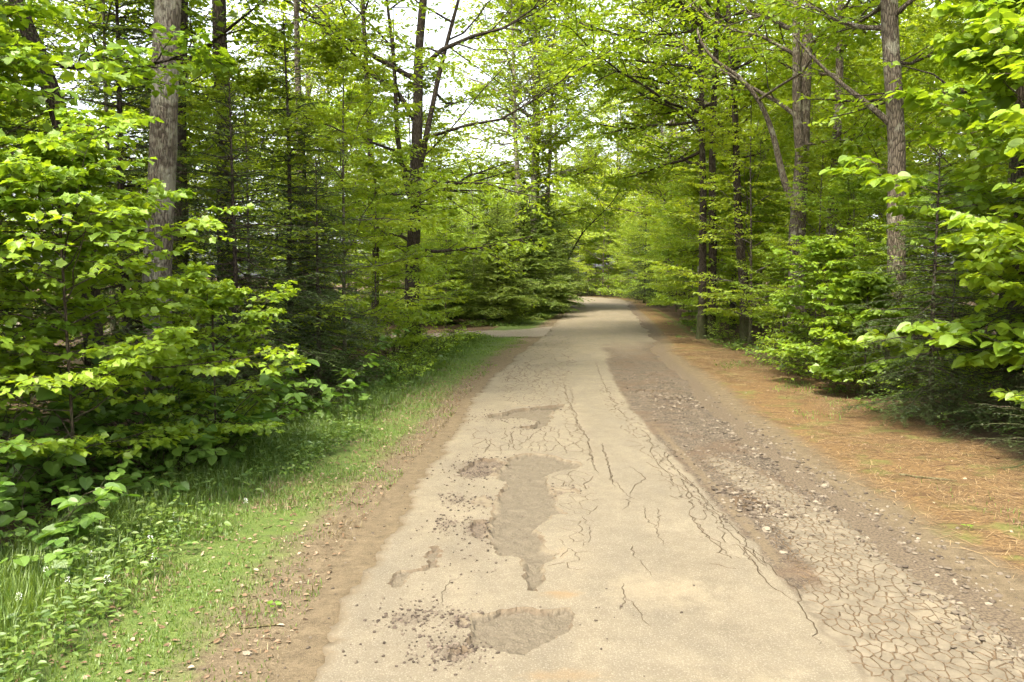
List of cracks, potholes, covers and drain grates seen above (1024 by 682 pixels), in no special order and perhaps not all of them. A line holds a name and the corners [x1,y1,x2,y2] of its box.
pothole [465,607,576,656]
pothole [487,404,565,429]
crack [468,335,1024,682]
pothole [456,458,507,479]
pothole [470,519,490,539]
pothole [485,453,582,592]
pothole [386,545,444,588]
